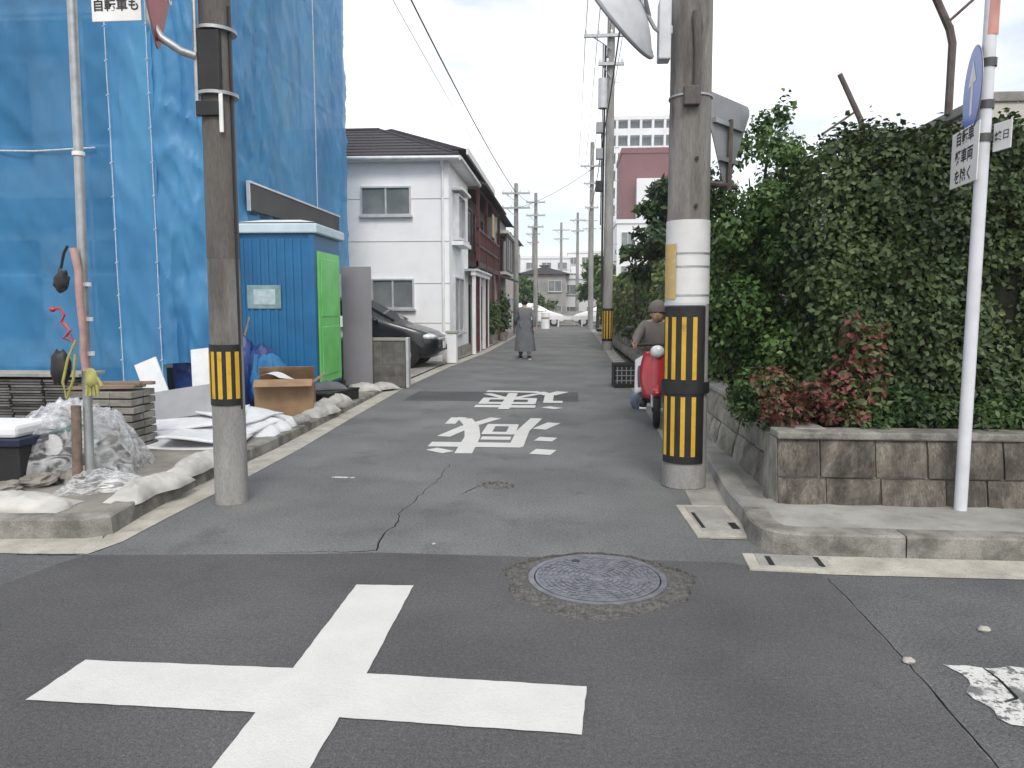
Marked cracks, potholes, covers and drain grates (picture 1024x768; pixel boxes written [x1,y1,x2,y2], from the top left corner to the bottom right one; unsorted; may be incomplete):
manhole cover [528,554,667,605]
crack [268,464,450,553]
